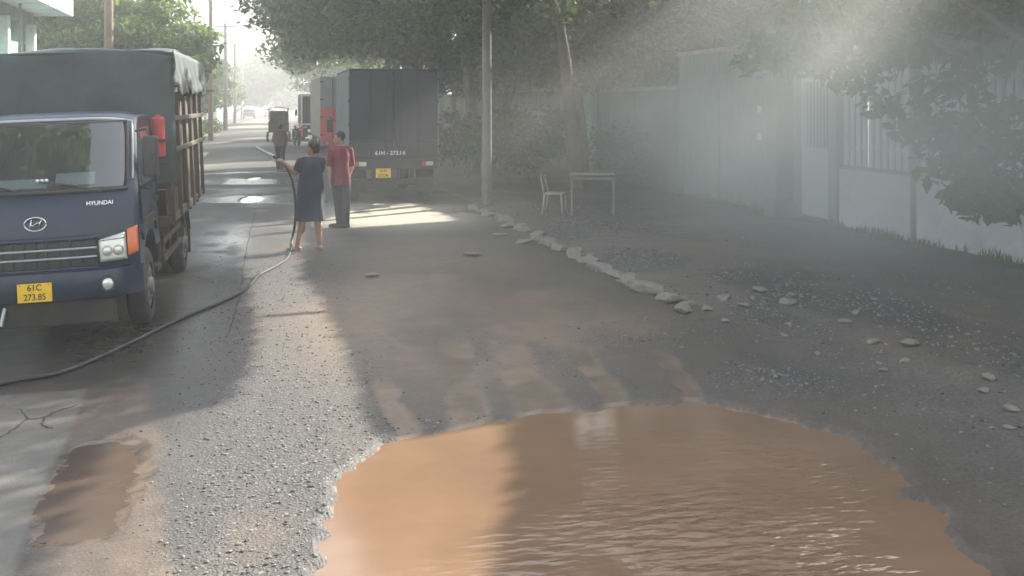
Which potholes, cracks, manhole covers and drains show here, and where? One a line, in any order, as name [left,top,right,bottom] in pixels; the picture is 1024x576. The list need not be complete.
pothole [299,396,1009,576]
crack [0,404,77,437]
pothole [22,432,157,551]
